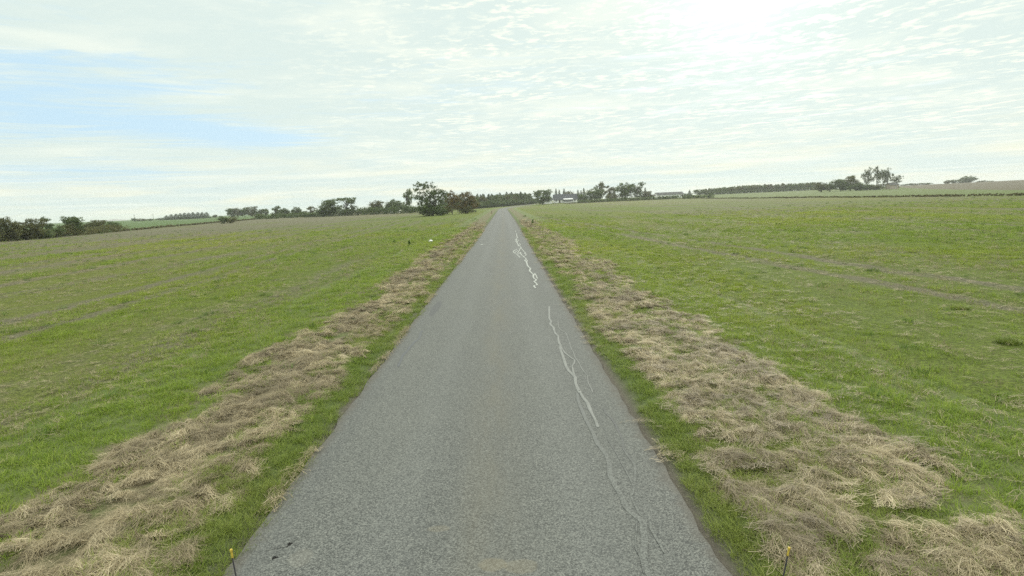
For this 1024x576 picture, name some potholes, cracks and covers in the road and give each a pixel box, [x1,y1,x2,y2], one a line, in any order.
crack [558,325,665,573]
